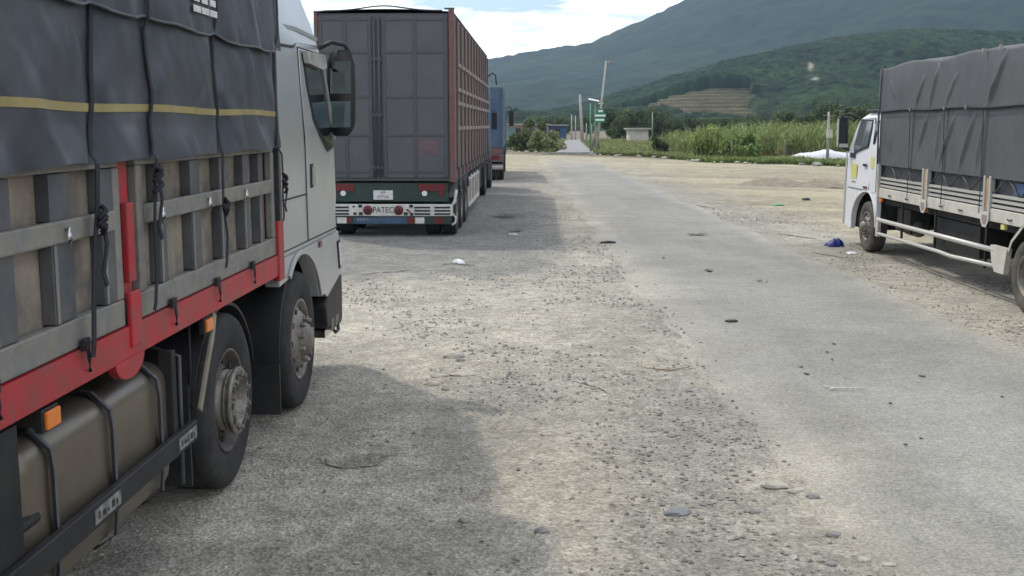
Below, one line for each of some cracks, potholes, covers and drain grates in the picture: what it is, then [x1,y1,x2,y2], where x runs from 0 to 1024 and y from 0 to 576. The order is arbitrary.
pothole [320,452,386,469]
